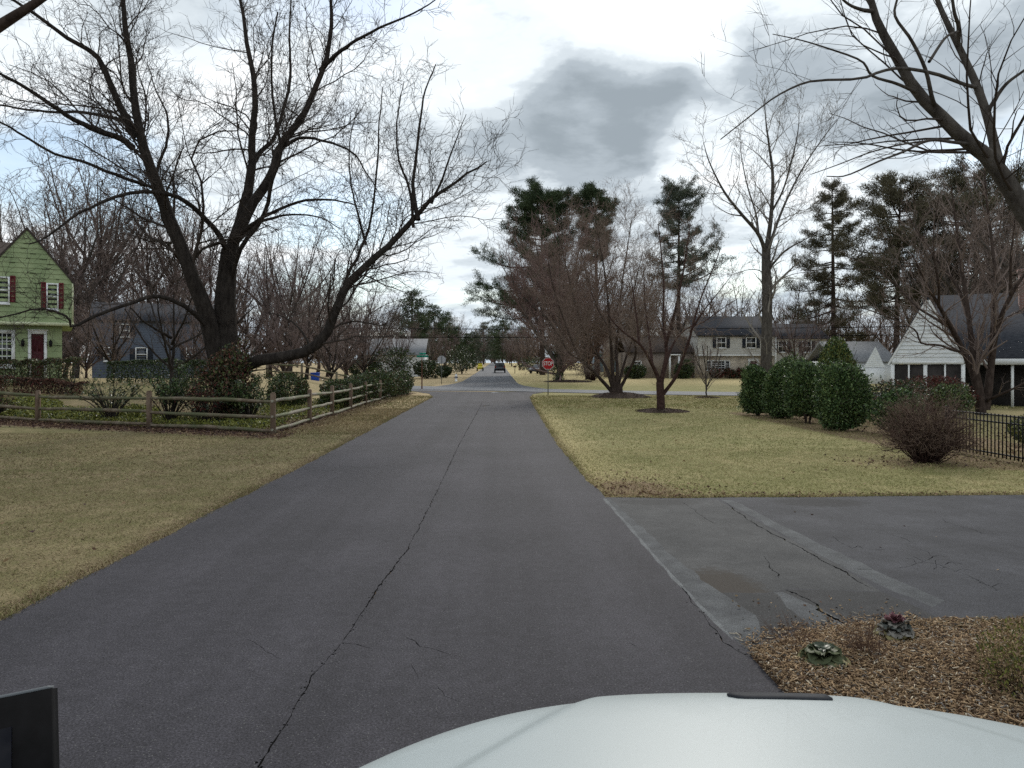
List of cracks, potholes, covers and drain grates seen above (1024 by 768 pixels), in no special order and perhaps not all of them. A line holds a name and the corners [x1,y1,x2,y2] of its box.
crack [835,534,1000,592]
crack [765,558,843,623]
crack [255,404,482,768]
crack [687,503,867,586]
